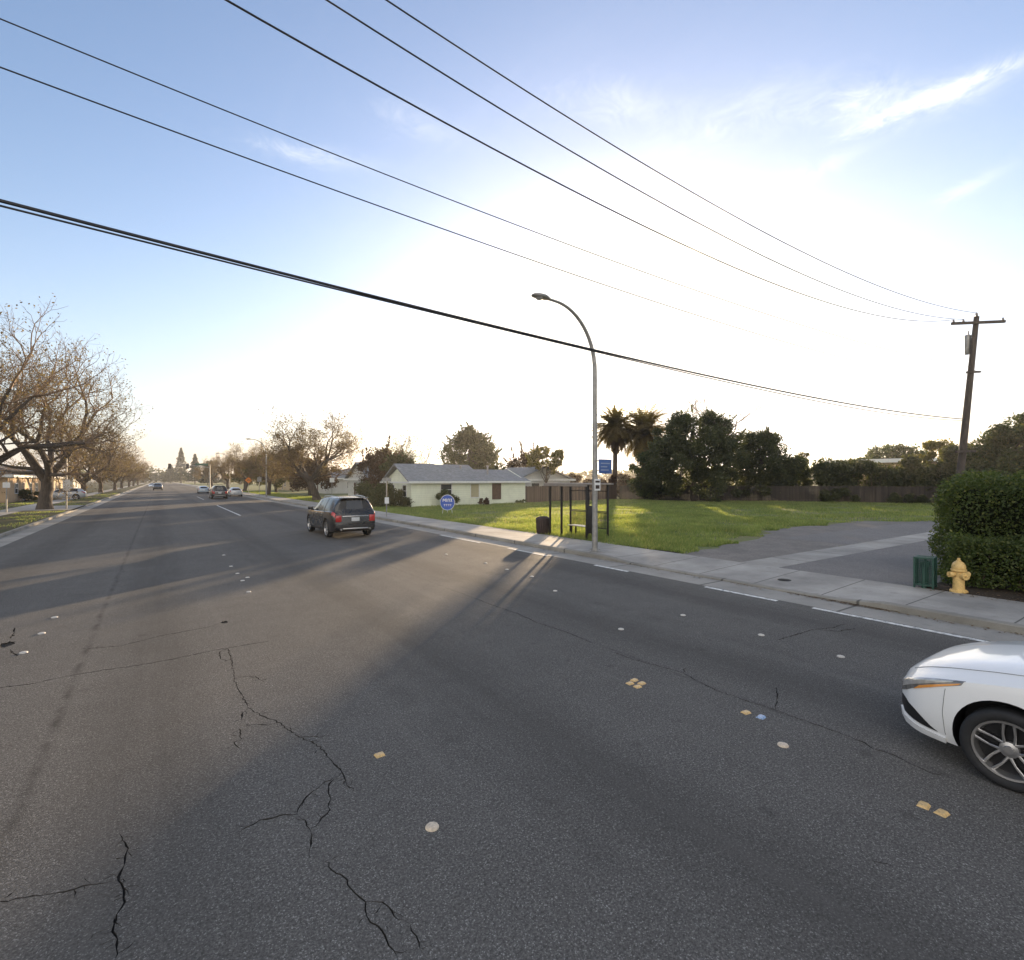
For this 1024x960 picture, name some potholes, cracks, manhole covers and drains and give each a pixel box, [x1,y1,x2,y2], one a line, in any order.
crack [0,640,432,956]
crack [616,653,949,778]
